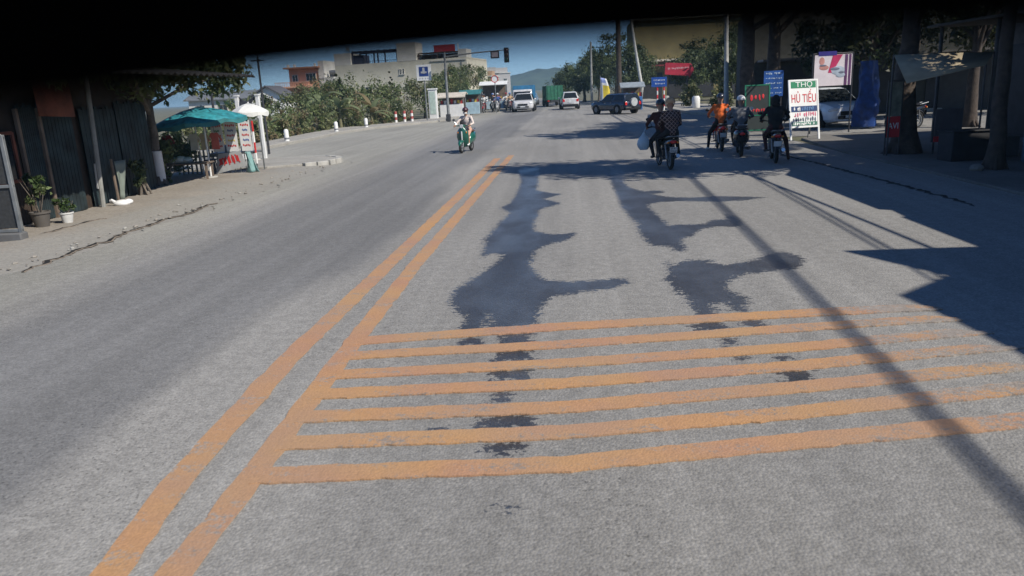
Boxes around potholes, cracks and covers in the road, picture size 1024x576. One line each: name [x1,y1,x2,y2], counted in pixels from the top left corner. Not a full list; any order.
crack [21,203,217,272]
crack [780,154,974,206]
